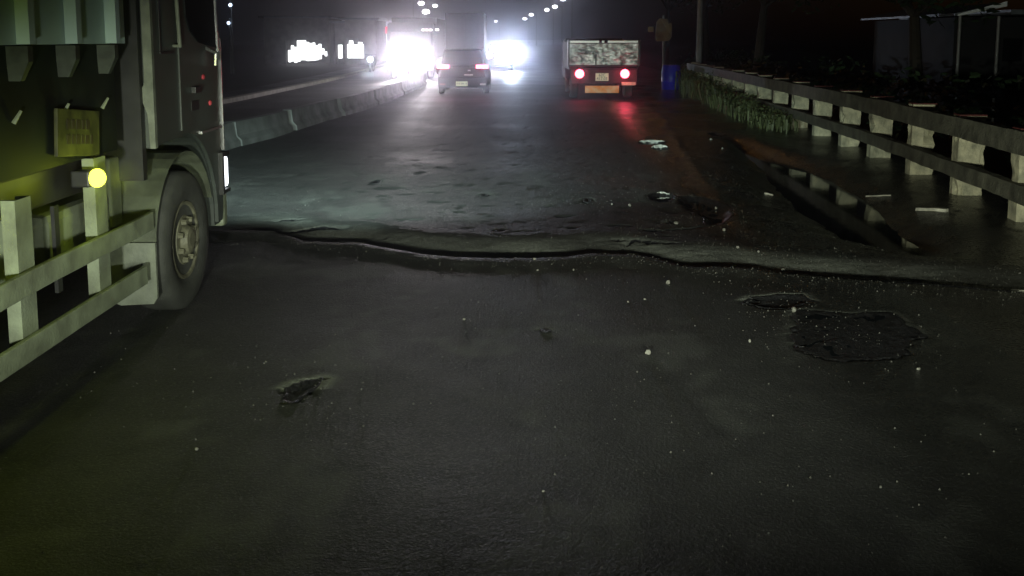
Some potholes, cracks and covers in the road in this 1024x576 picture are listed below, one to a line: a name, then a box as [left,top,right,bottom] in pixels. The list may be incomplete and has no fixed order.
pothole [789,310,928,362]
pothole [676,196,735,226]
pothole [281,377,326,405]
pothole [742,294,814,309]
